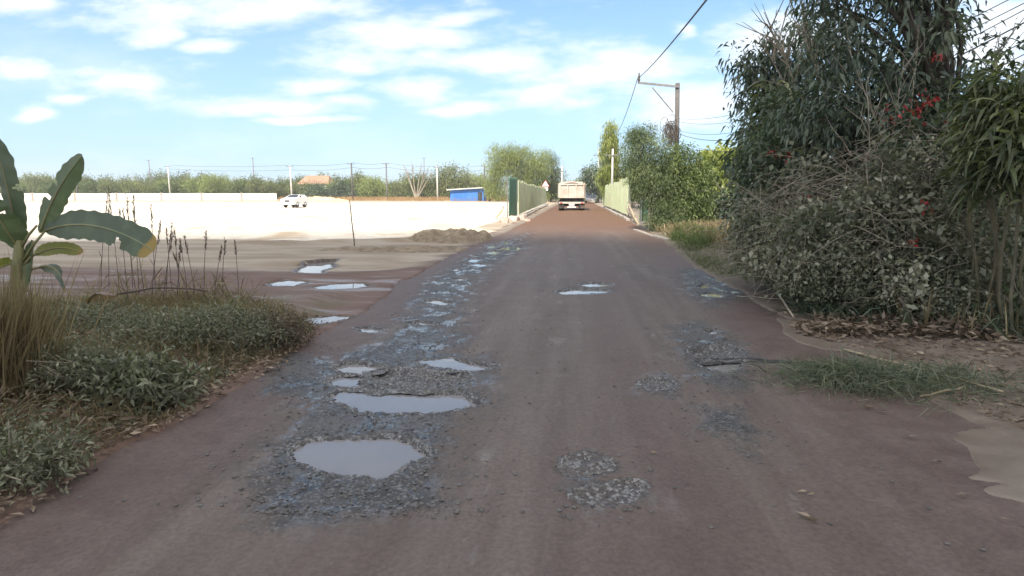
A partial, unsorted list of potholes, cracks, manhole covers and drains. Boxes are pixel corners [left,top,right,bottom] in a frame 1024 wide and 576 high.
pothole [275,433,439,482]
pothole [323,386,490,416]
pothole [308,282,376,290]
pothole [292,258,340,274]
pothole [301,315,357,325]
pothole [414,357,501,374]
pothole [692,360,746,373]
pothole [555,451,617,478]
pothole [686,343,754,362]
pothole [566,476,652,511]
pothole [635,377,681,391]
pothole [322,373,372,393]
